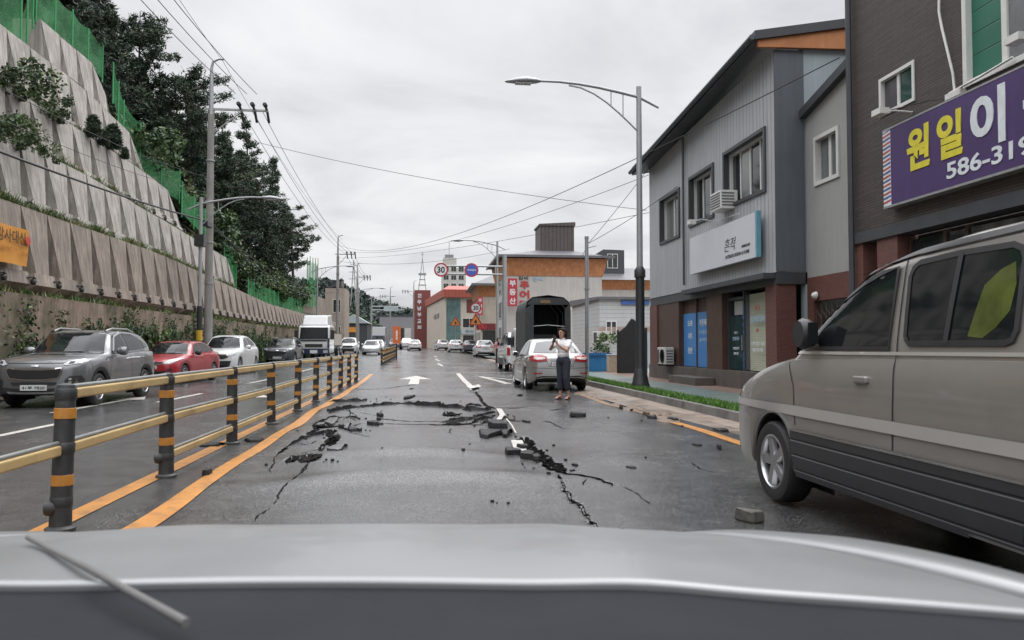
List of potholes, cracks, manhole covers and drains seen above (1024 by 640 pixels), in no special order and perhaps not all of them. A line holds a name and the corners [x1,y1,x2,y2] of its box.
crack [255,384,650,527]
